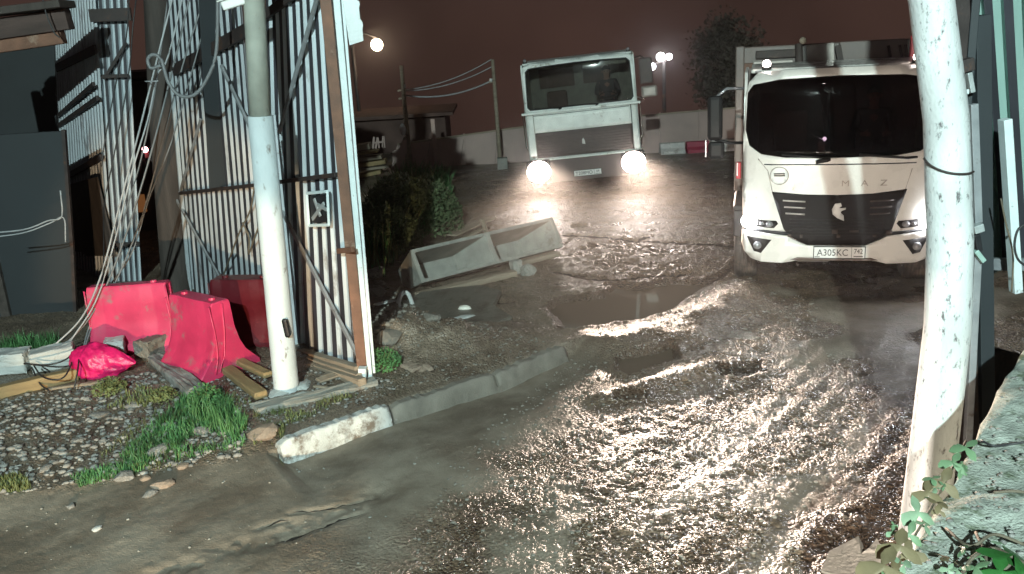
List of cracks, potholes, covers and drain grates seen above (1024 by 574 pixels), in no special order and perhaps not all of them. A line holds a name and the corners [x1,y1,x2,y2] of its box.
pothole [713,358,769,378]
crack [561,235,734,248]
crack [261,500,370,544]
pothole [540,258,734,330]
pothole [613,336,683,375]
